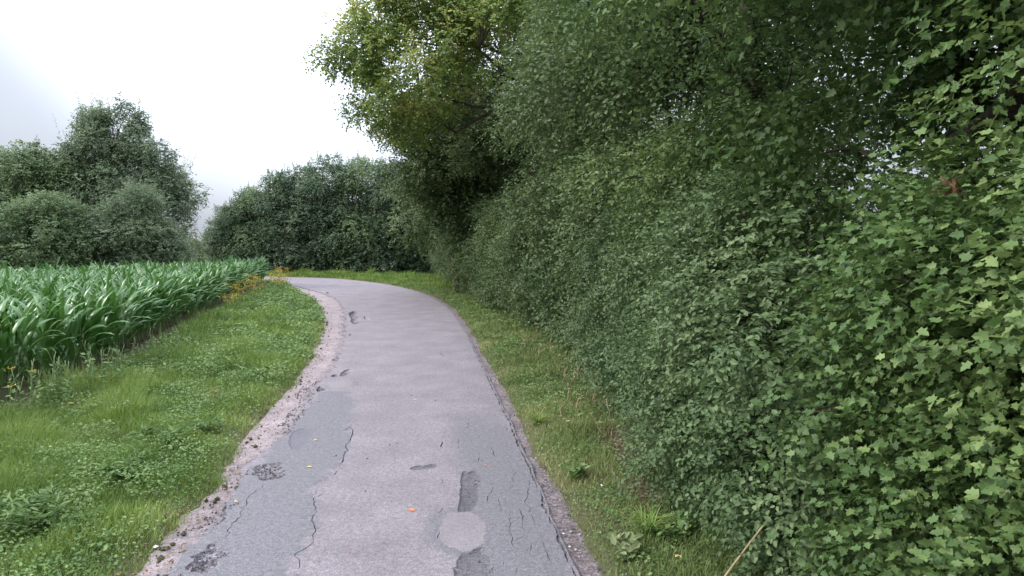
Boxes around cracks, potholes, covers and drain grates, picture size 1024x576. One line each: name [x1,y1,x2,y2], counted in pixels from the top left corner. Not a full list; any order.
pothole [252,462,286,481]
crack [437,331,577,576]
pothole [452,546,491,576]
pothole [457,471,481,512]
pothole [185,542,228,574]
